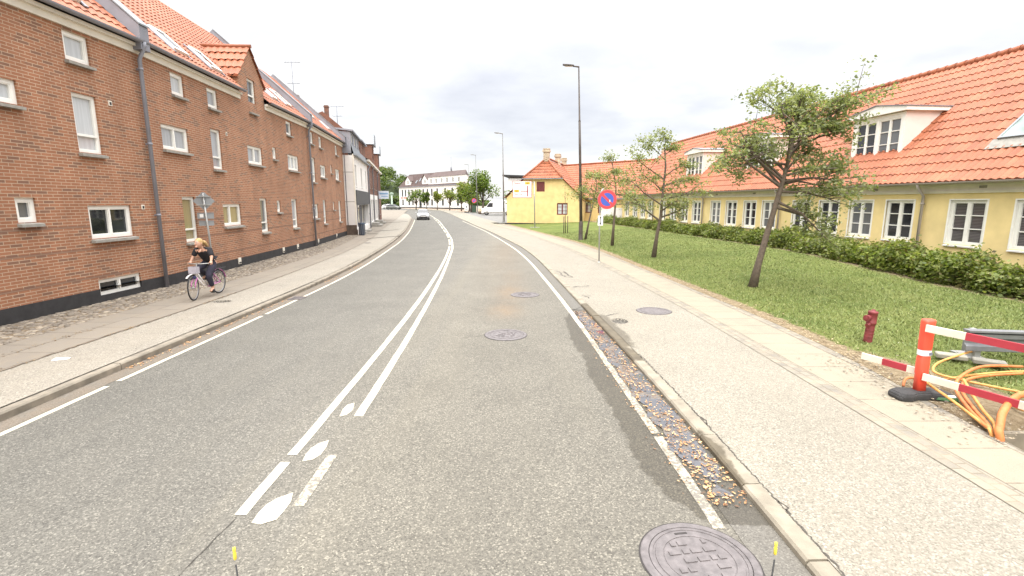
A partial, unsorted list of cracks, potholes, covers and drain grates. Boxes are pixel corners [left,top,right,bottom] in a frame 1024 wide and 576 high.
manhole cover [484,329,527,341]
manhole cover [636,307,672,315]
manhole cover [639,523,765,576]
